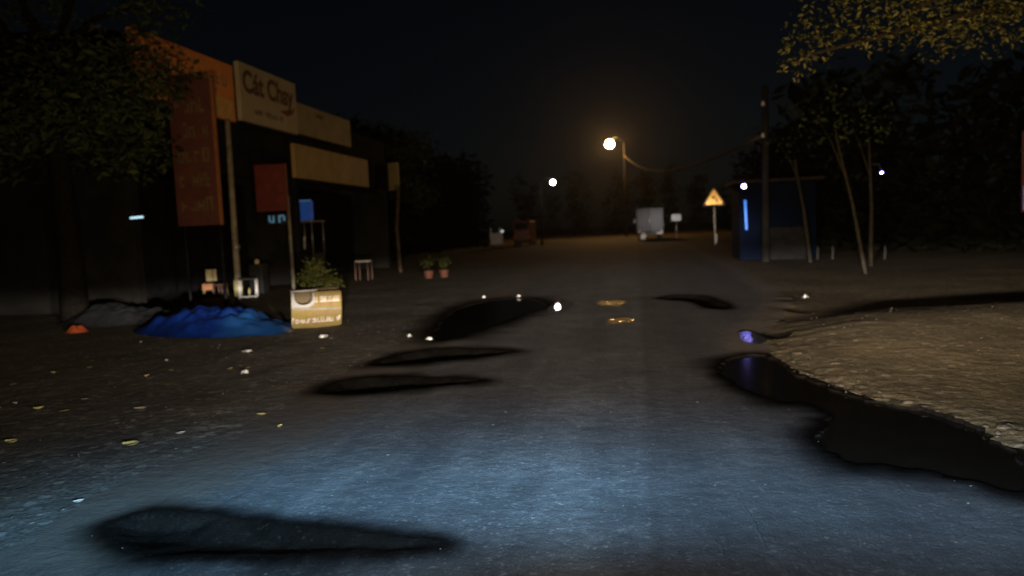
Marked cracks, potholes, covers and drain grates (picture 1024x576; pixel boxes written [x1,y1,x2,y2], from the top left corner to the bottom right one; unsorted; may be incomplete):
pothole [718,354,1024,492]
crack [710,495,767,555]
pothole [103,509,448,559]
pothole [432,298,549,340]
pothole [319,376,484,394]
pothole [762,332,793,340]
pothole [659,294,730,309]
pothole [371,348,513,365]
